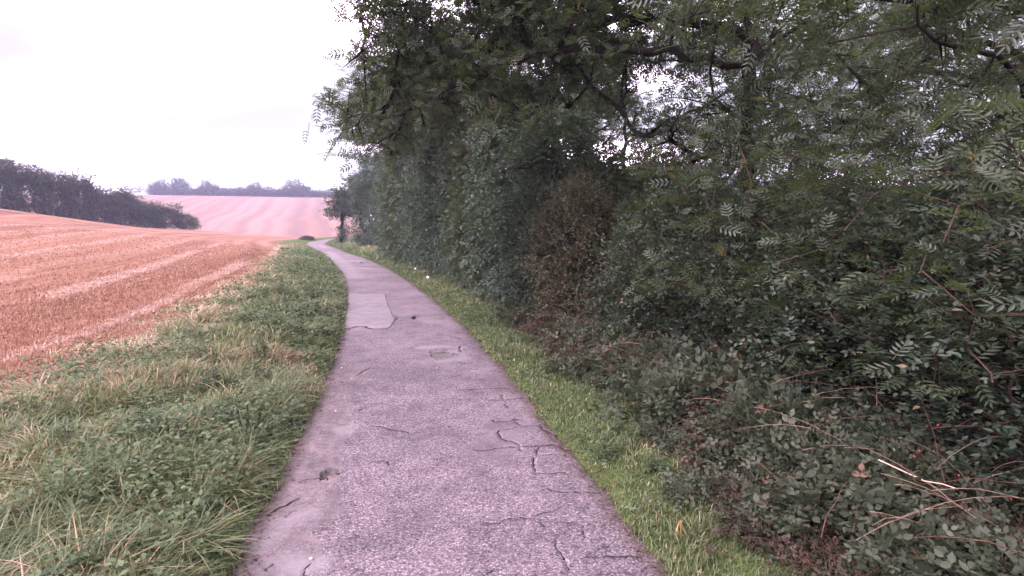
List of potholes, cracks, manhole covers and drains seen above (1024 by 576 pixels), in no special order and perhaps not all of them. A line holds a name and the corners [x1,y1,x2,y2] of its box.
pothole [426,350,459,361]
crack [356,368,373,376]
crack [264,476,316,518]
crack [459,386,641,576]
pothole [315,466,345,483]
